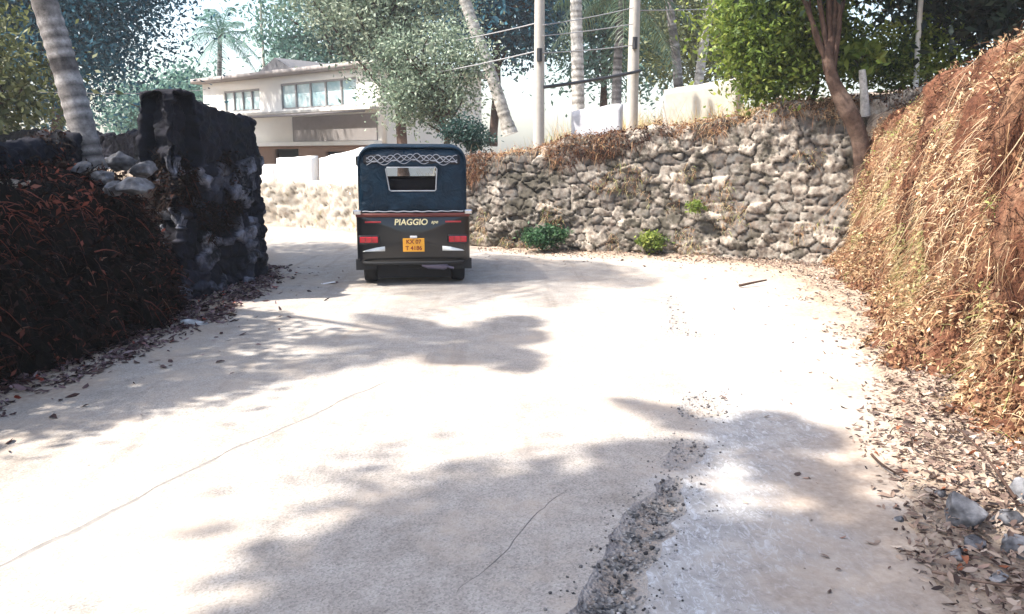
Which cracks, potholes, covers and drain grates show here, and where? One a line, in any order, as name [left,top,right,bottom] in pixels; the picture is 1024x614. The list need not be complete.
crack [457,489,568,592]
pothole [543,470,718,614]
crack [0,381,387,567]
